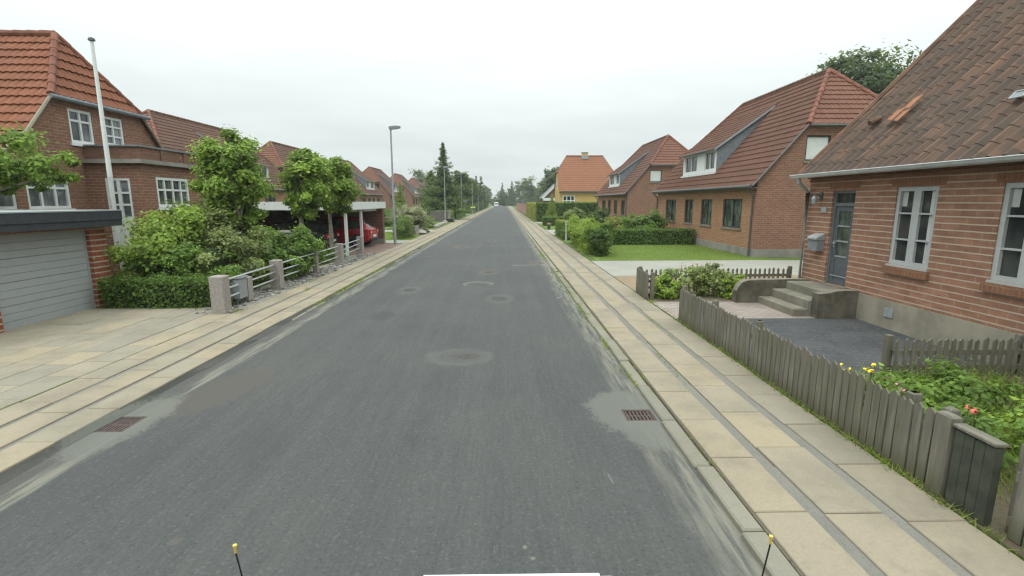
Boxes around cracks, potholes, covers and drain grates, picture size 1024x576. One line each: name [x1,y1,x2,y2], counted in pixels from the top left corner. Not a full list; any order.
drain grate [621,410,657,421]
drain grate [95,417,146,432]
